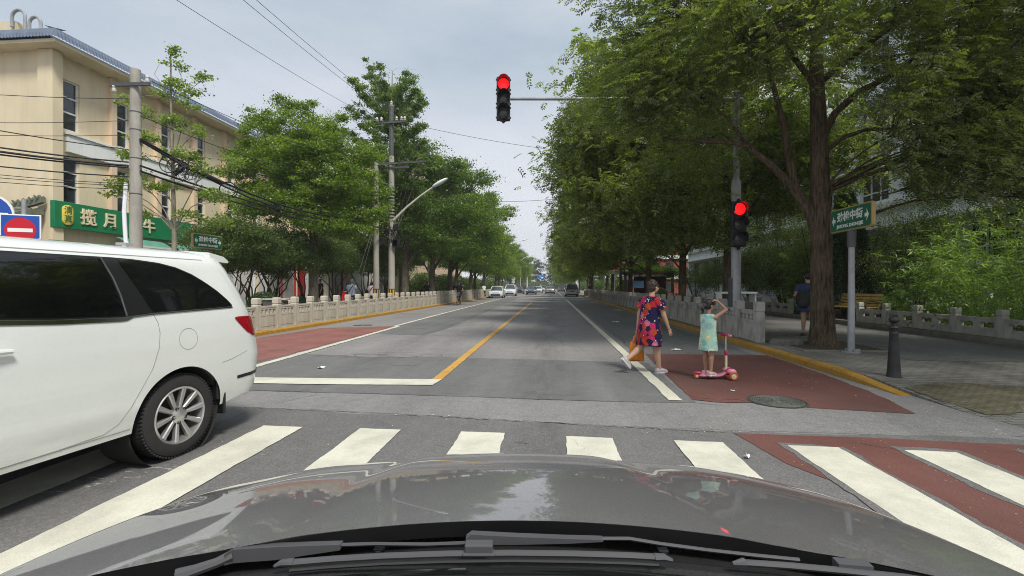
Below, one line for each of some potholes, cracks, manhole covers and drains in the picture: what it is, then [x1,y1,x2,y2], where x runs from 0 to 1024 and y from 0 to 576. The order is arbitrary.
manhole cover [746,395,809,408]
